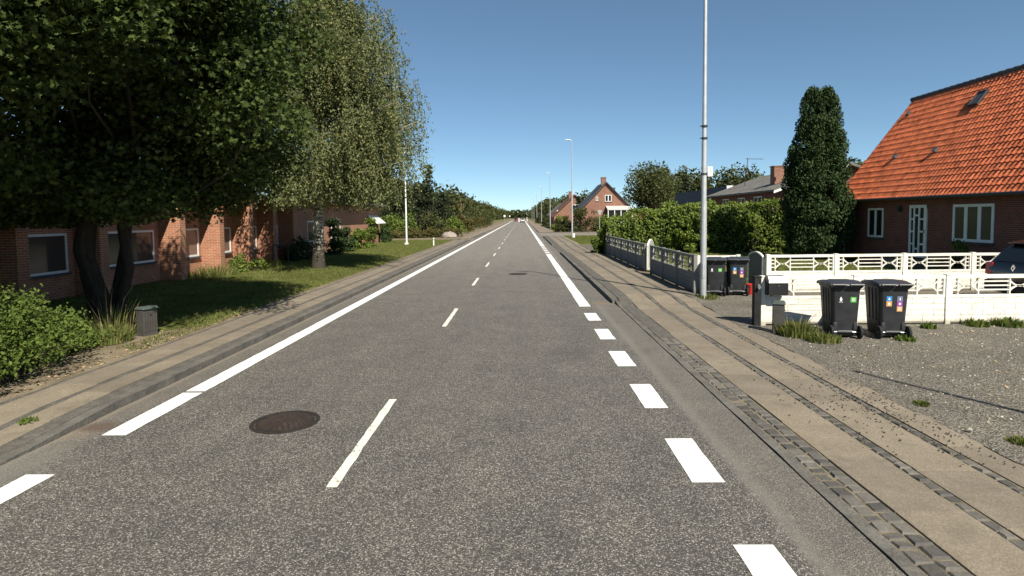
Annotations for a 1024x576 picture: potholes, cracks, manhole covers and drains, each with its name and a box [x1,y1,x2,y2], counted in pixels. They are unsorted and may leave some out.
manhole cover [249,410,320,434]
